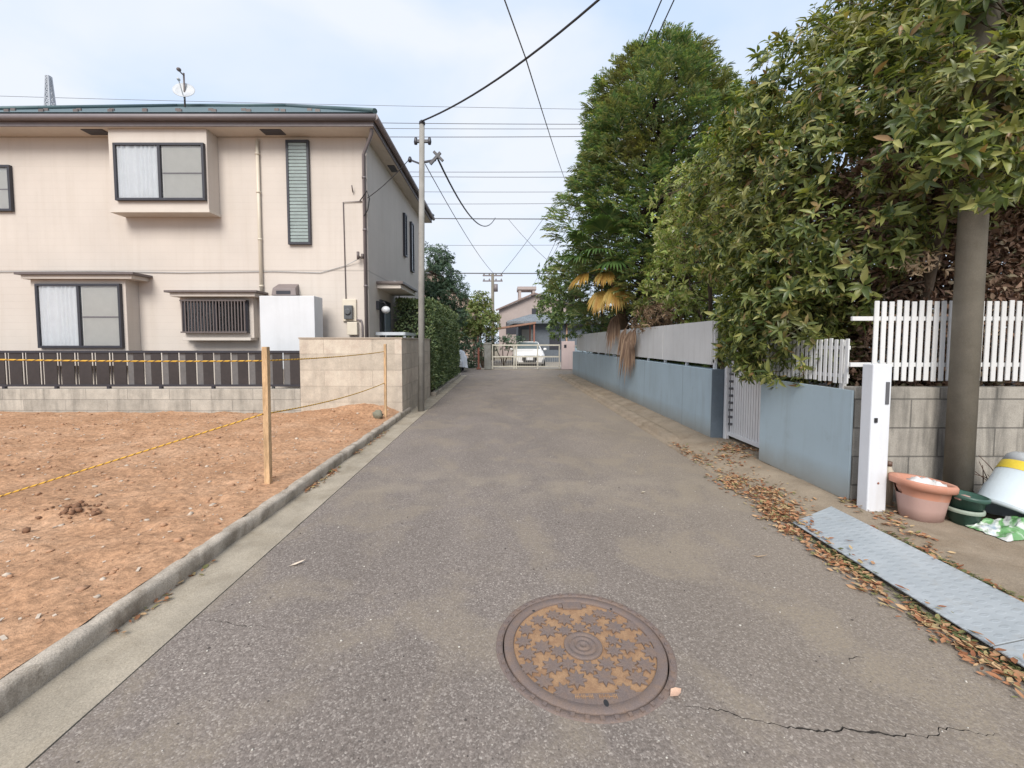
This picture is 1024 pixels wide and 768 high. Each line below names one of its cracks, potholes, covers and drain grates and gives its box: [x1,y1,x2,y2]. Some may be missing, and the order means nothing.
crack [686,706,997,738]
manhole cover [496,593,677,724]
